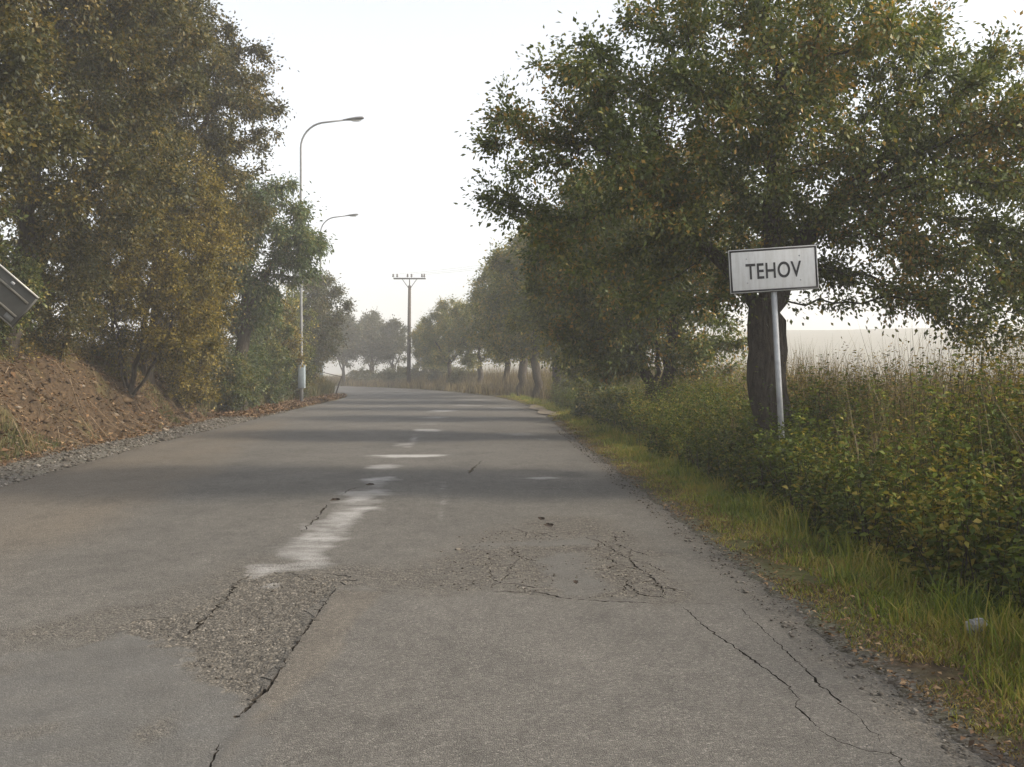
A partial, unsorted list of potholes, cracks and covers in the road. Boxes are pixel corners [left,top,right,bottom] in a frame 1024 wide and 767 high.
crack [468,529,673,603]
crack [683,606,904,767]
pothole [119,572,357,705]
